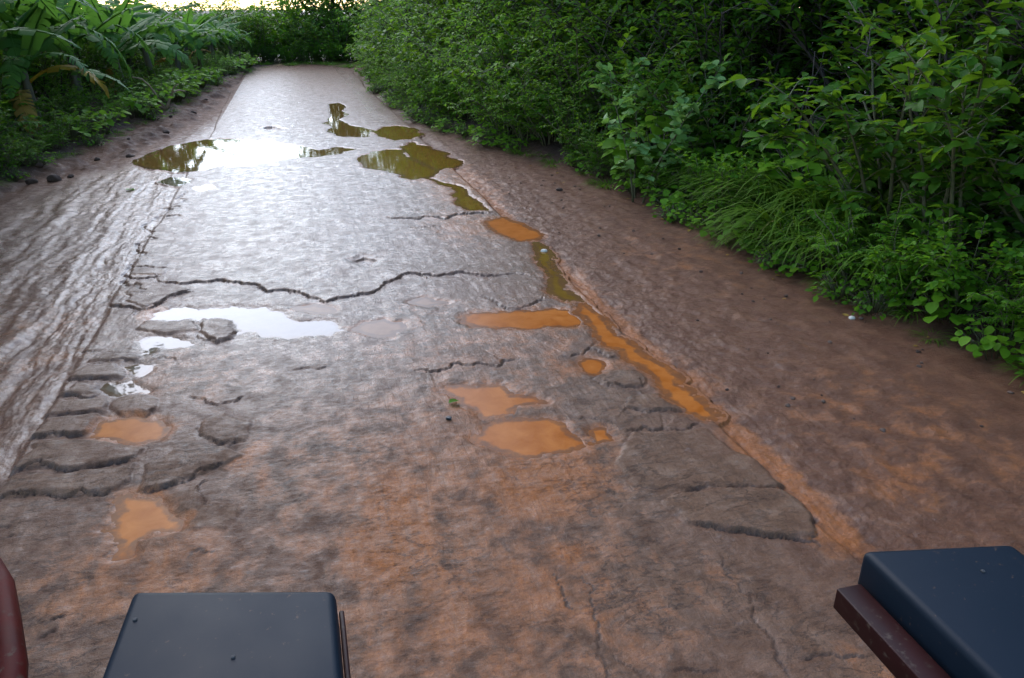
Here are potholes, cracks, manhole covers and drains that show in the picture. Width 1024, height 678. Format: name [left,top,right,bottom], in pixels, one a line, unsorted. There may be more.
crack [107,187,555,311]
pothole [138,336,198,356]
pothole [150,306,343,340]
pothole [292,304,337,314]
pothole [484,216,546,242]
pothole [469,416,592,460]
crack [594,376,702,434]
pothole [373,125,424,140]
pothole [322,102,375,137]
pothole [357,149,439,180]
crack [662,482,874,678]
